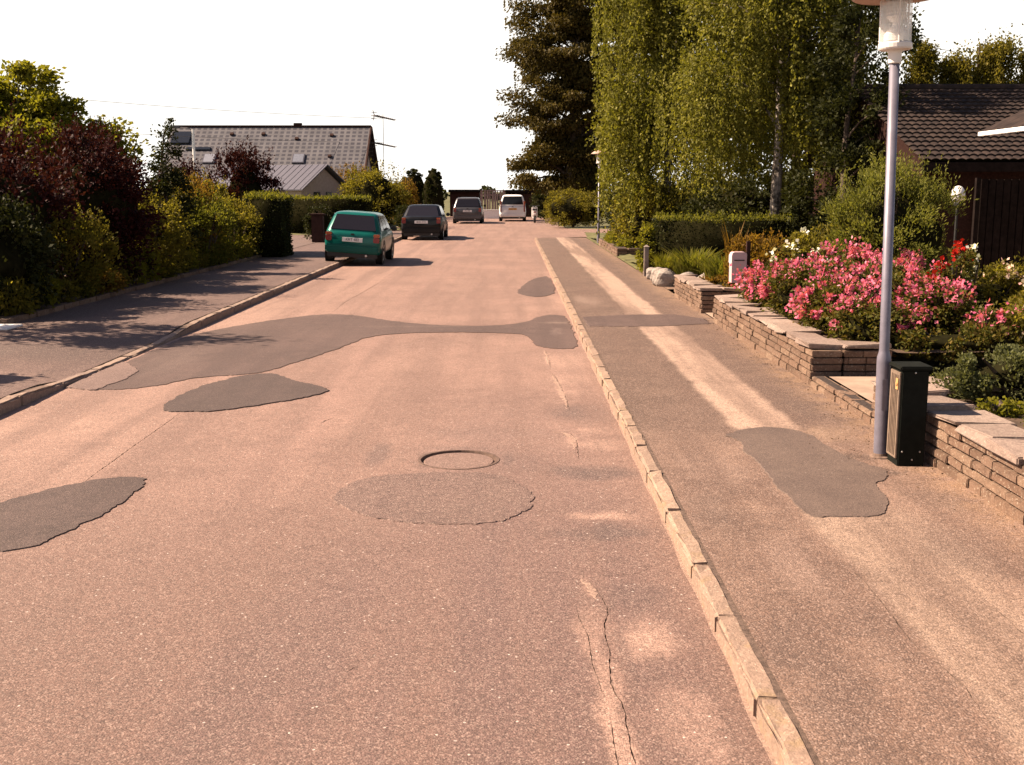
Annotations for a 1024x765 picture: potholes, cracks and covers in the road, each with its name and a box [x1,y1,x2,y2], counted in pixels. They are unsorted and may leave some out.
manhole cover [417,450,500,470]
crack [543,351,570,411]
crack [550,430,579,457]
crack [539,569,647,765]
